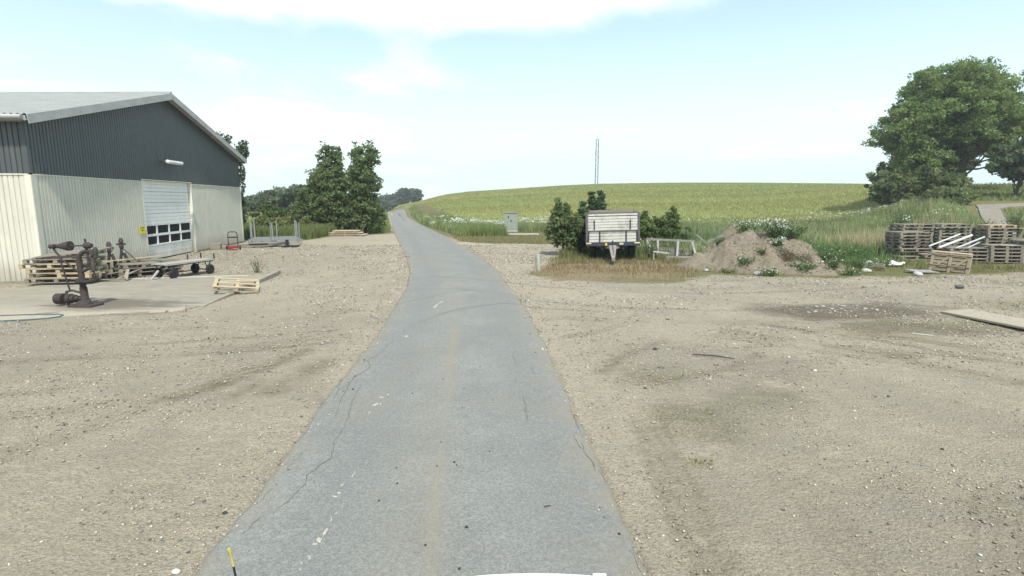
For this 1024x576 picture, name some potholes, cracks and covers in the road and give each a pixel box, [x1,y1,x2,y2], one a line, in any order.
crack [263,349,384,509]
